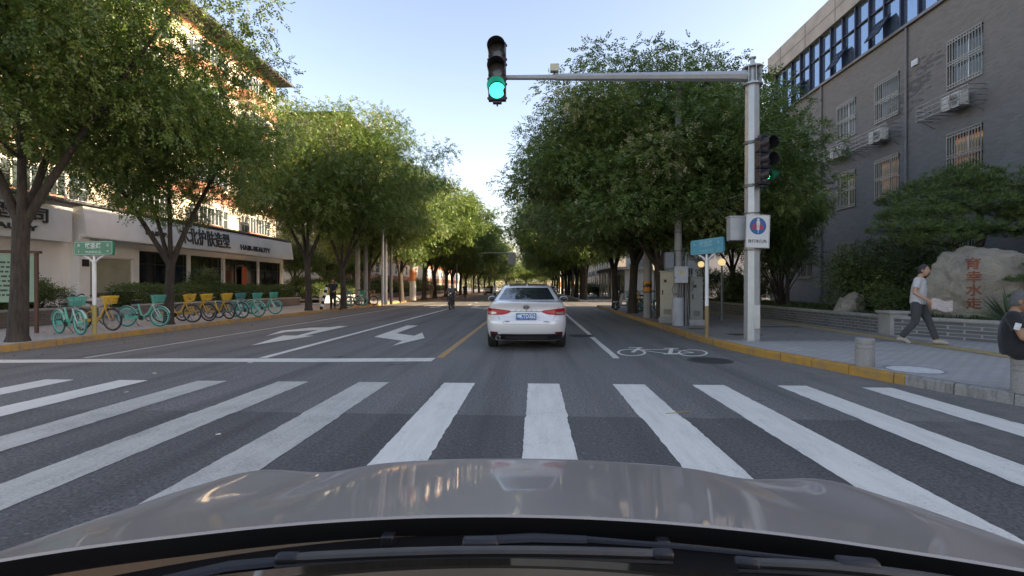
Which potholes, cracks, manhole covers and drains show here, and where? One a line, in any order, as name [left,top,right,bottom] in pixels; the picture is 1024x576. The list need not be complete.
manhole cover [882,365,949,374]
